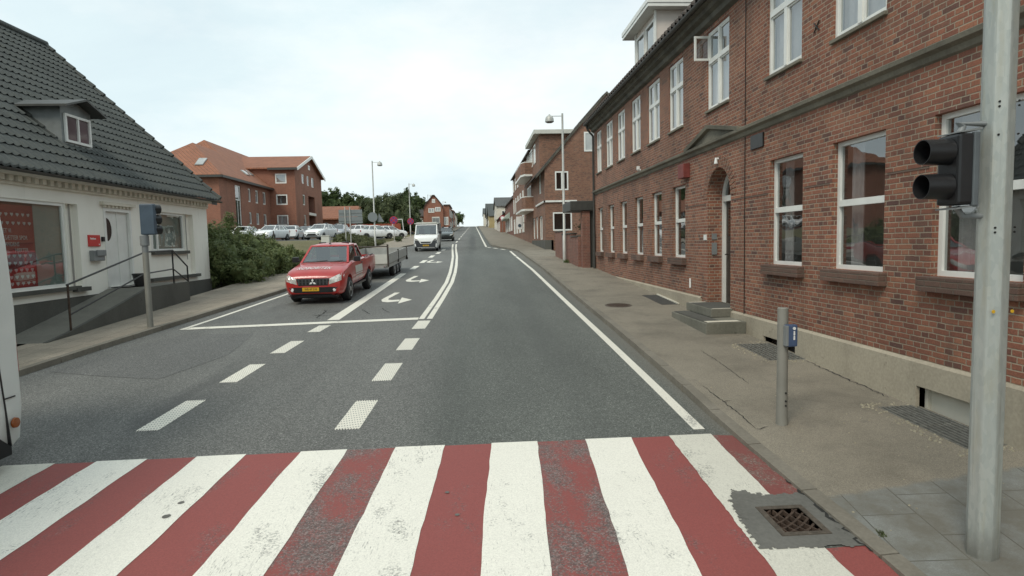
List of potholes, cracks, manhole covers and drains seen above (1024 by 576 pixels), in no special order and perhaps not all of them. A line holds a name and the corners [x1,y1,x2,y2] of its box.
drain grate [860,401,1020,457]
crack [701,350,768,429]
drain grate [755,504,832,536]
drain grate [642,294,679,305]
drain grate [731,341,807,363]
